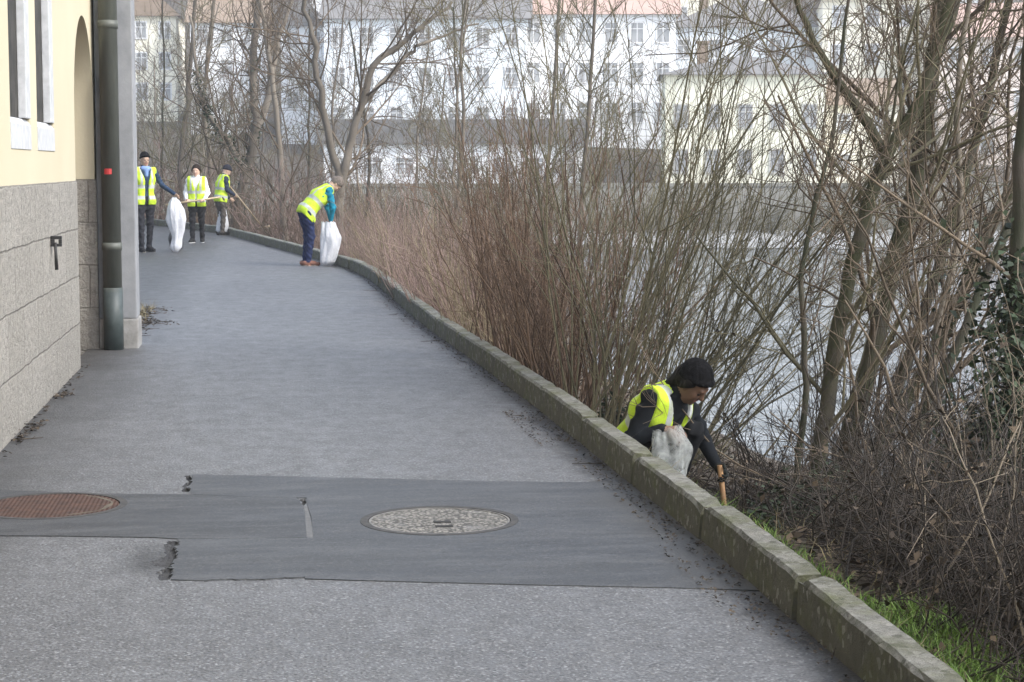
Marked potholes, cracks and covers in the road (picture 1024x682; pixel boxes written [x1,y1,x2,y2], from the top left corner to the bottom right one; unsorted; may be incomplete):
manhole cover [360,506,519,535]
pothole [150,541,178,581]
manhole cover [0,492,128,519]
